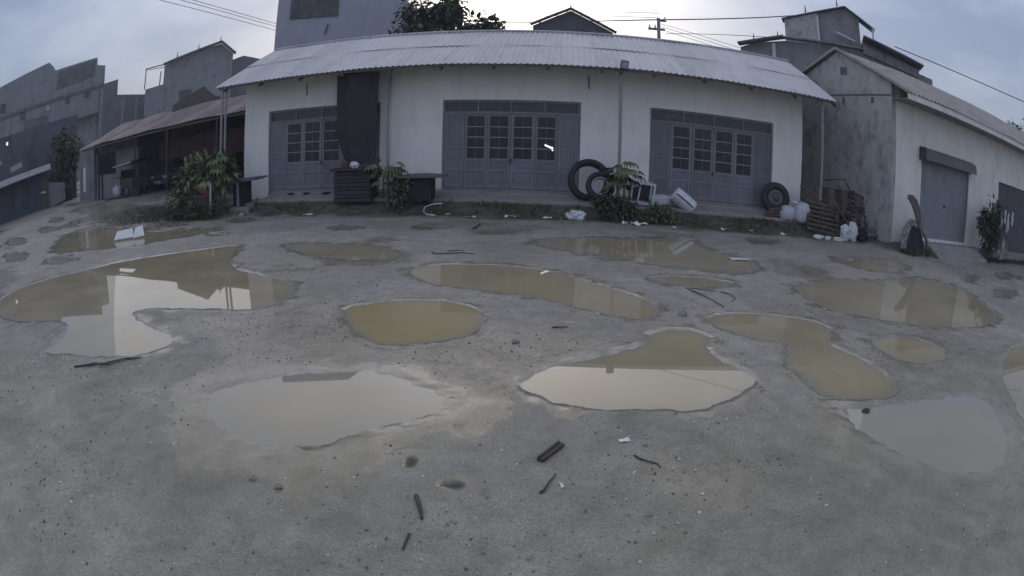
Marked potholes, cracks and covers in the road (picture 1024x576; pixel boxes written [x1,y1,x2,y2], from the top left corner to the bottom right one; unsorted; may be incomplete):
pothole [328,296,500,350]
pothole [693,309,903,400]
pothole [0,243,315,368]
pothole [982,336,1024,428]
pothole [39,225,236,256]
pothole [189,229,246,240]
pothole [776,275,1010,334]
pothole [522,234,774,277]
pothole [501,323,771,422]
pothole [848,329,964,370]
